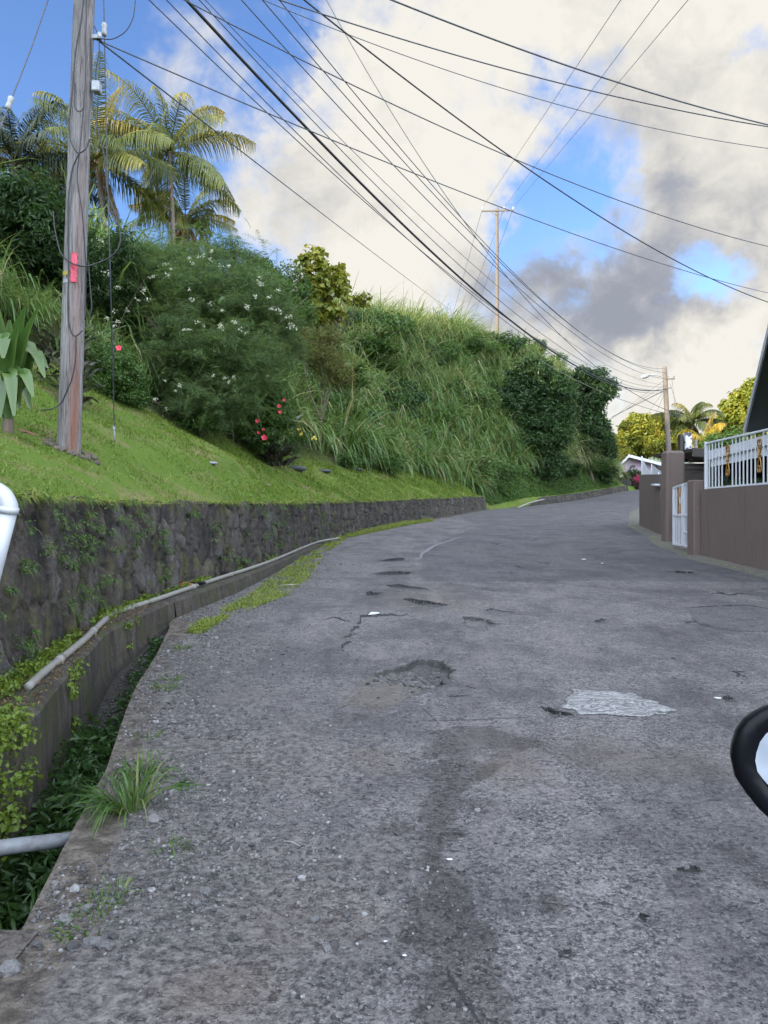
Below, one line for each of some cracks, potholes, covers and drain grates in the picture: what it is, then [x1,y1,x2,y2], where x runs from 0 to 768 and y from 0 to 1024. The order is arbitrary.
pothole [396,596,457,610]
pothole [345,657,462,711]
pothole [378,583,438,592]
